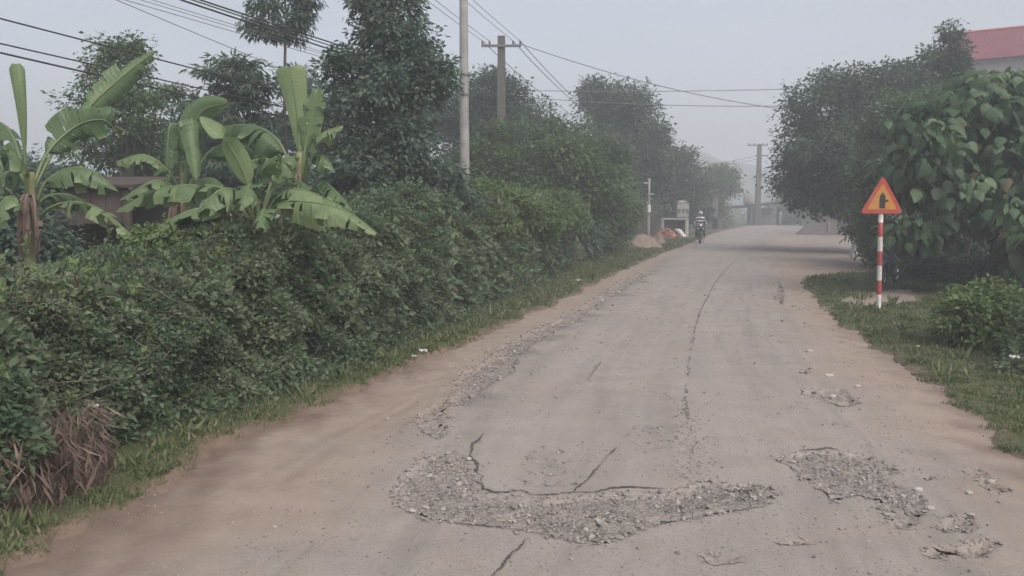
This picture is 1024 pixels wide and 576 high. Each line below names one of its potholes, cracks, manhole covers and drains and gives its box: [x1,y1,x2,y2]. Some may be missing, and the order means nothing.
crack [469,433,664,495]
pothole [800,385,862,410]
pothole [931,512,989,533]
pothole [770,445,929,532]
pothole [973,468,1014,502]
pothole [919,535,1013,572]
crack [455,522,527,576]
pothole [384,446,785,553]
